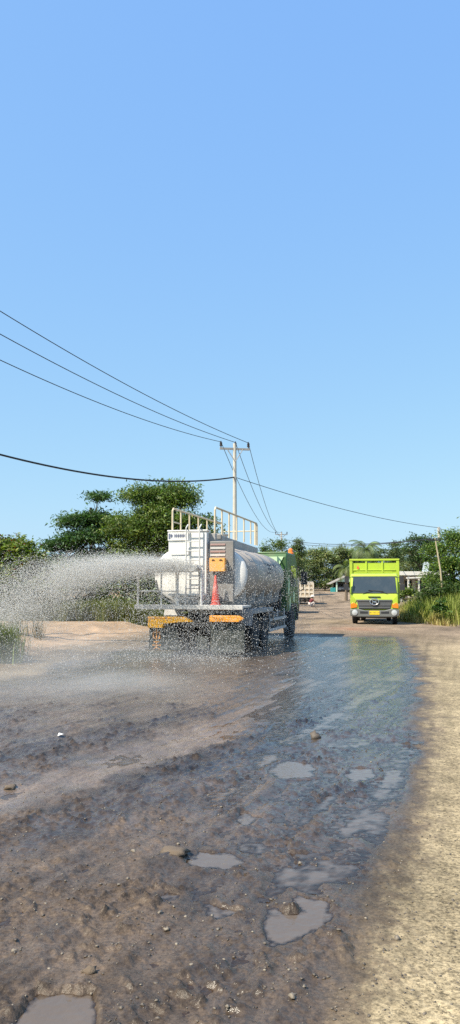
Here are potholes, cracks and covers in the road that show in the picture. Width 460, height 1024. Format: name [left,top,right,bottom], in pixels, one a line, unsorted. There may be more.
pothole [264,759,322,780]
pothole [337,766,382,783]
pothole [0,979,105,1024]
pothole [255,891,348,949]
pothole [181,848,257,872]
